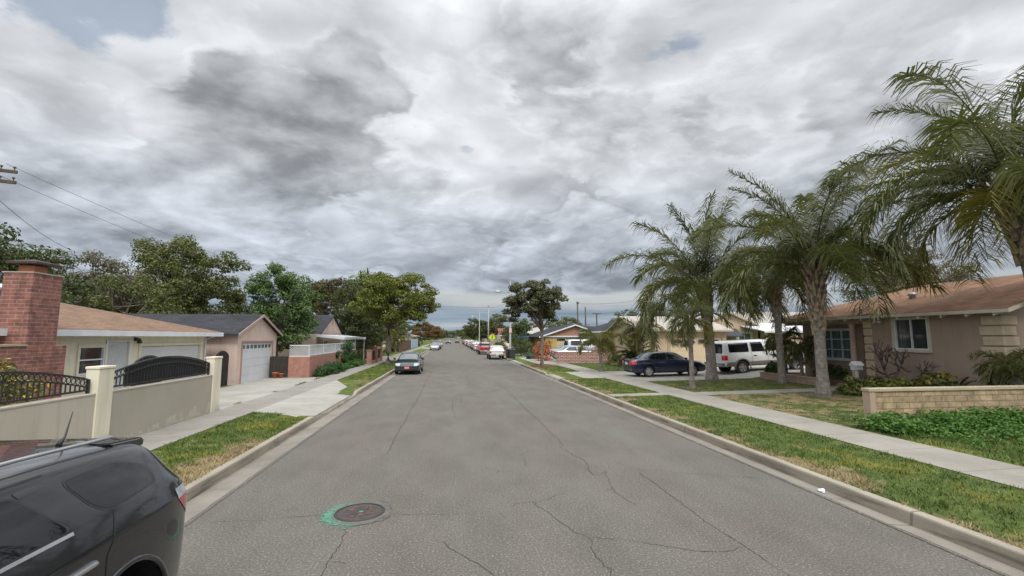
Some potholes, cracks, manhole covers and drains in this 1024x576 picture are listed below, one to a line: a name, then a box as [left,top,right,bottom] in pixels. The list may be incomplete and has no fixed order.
crack [502,473,790,576]
manhole cover [318,499,394,530]
